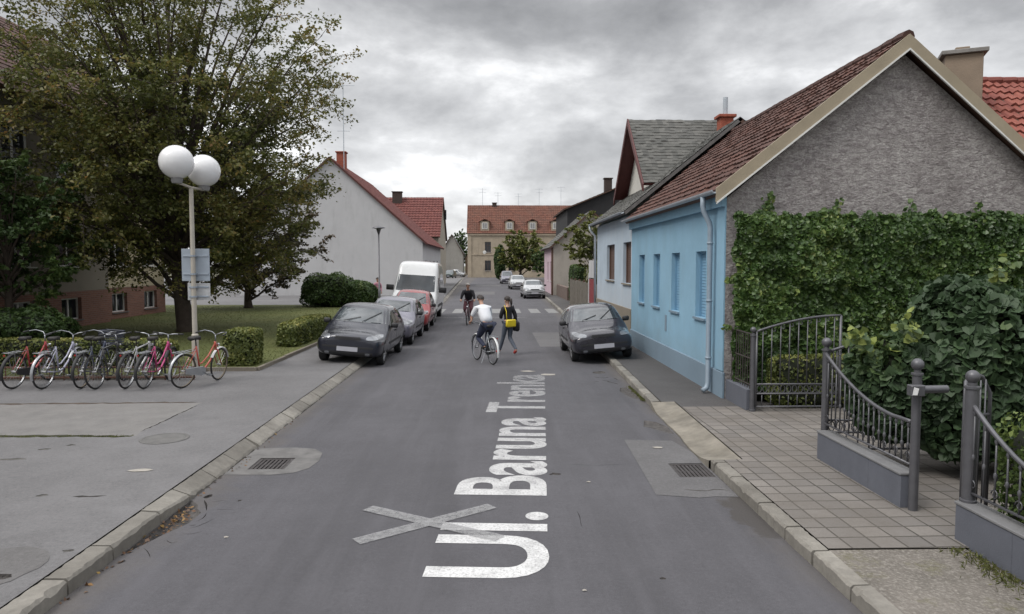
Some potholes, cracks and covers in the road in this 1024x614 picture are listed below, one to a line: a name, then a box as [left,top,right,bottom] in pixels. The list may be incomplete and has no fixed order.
manhole cover [139,433,190,444]
crack [145,500,231,556]
